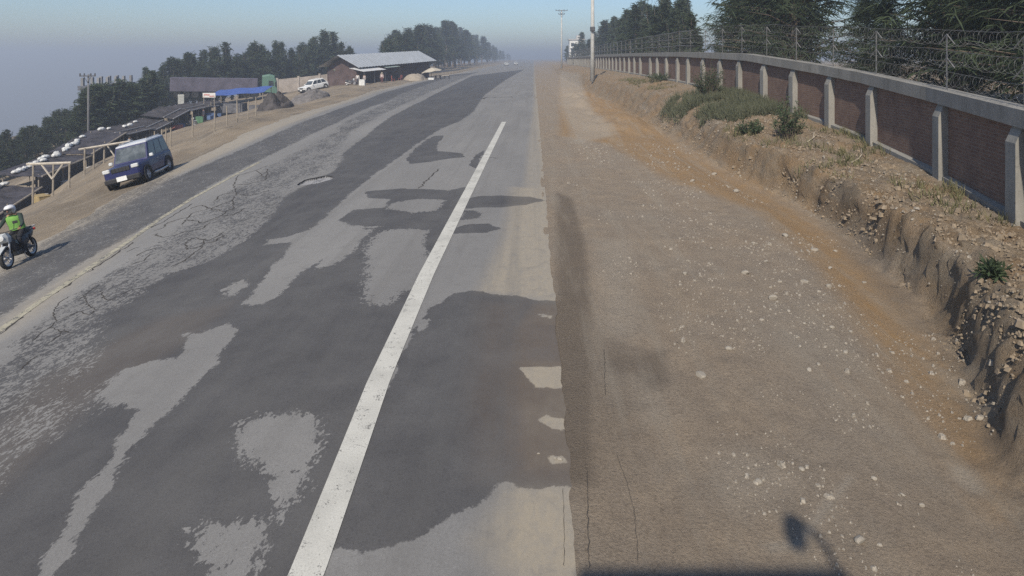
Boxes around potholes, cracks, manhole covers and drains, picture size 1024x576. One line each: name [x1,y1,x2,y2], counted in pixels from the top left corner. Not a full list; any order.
pothole [297,175,334,186]
crack [0,166,269,370]
